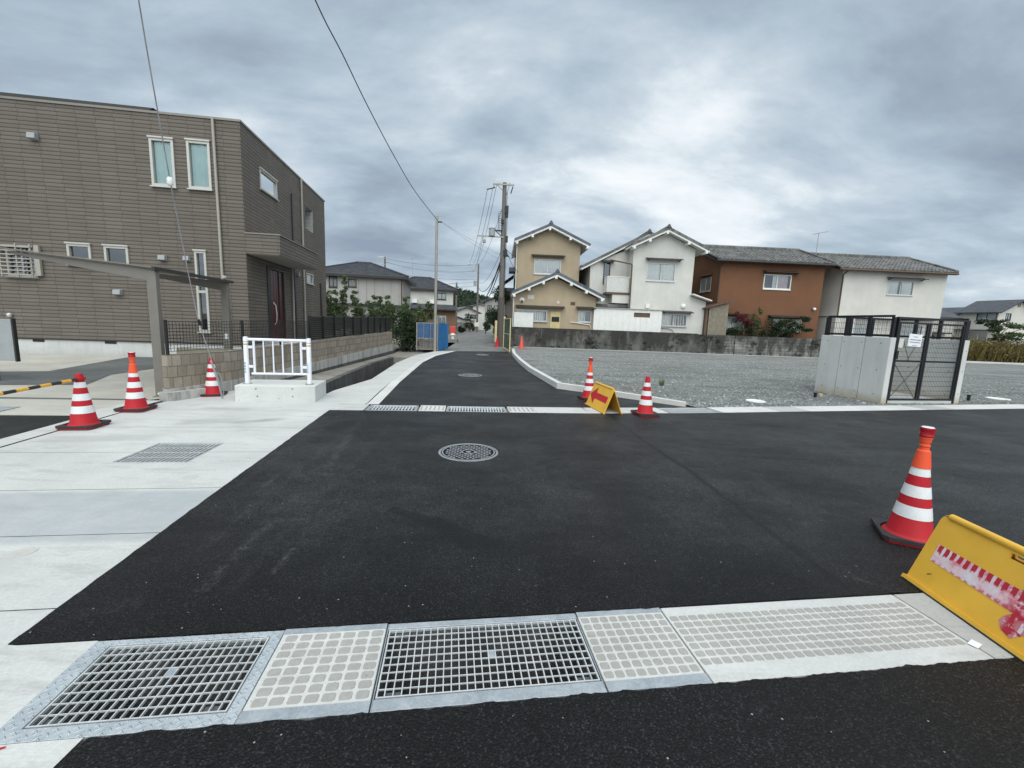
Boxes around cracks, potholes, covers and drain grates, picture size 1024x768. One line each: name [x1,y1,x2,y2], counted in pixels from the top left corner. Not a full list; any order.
drain grate [111,443,224,463]
drain grate [370,613,607,713]
manhole cover [438,443,498,462]
drain grate [0,630,285,746]
